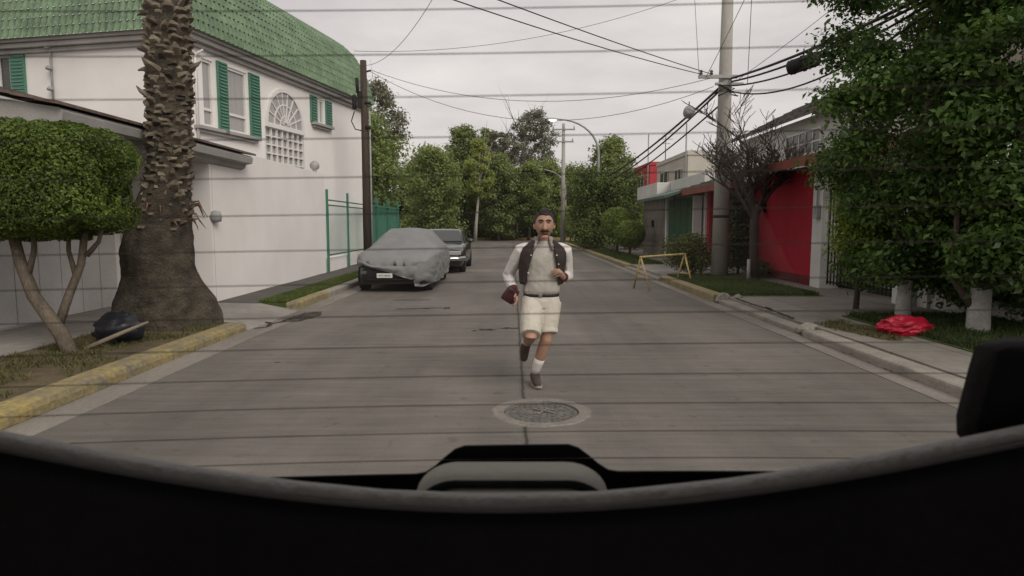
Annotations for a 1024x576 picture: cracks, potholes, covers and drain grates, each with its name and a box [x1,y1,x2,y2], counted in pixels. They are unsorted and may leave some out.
manhole cover [491,398,592,427]
